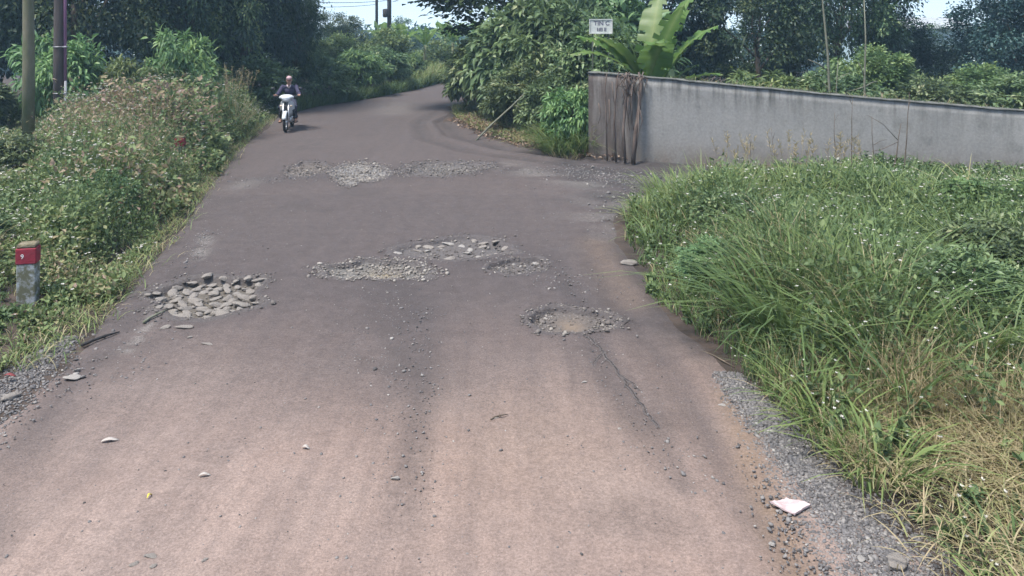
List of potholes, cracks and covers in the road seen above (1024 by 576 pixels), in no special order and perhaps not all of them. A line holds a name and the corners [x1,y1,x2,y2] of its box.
pothole [481,254,560,276]
pothole [324,158,399,189]
pothole [513,302,633,337]
pothole [130,272,279,323]
pothole [307,256,449,282]
crack [587,336,660,428]
pothole [377,232,531,263]
pothole [394,159,500,179]
